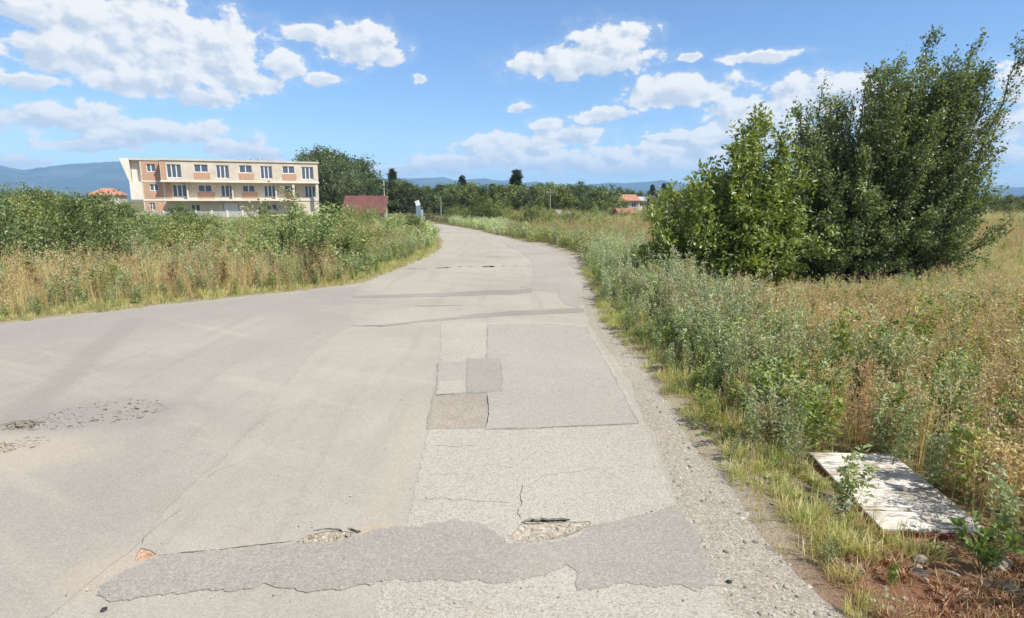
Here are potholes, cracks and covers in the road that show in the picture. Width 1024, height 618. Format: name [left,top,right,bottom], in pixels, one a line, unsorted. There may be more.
pothole [0,442,16,453]
crack [431,445,597,524]
pothole [509,521,590,543]
crack [142,464,290,556]
pothole [298,531,359,544]
pothole [0,419,44,431]
